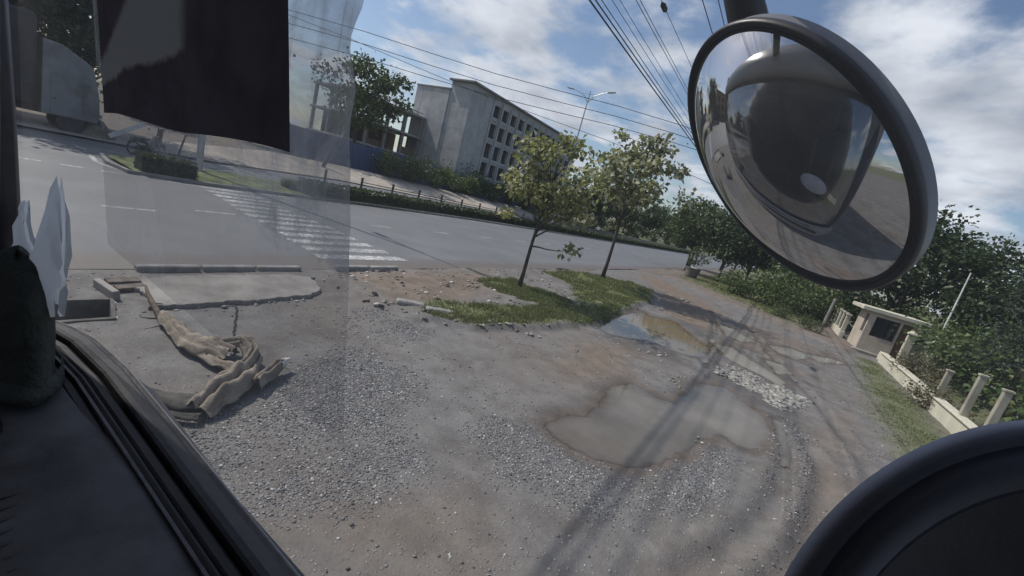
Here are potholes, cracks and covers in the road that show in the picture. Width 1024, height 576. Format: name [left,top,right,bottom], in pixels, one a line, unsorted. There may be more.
pothole [532,377,791,477]
pothole [597,309,724,363]
